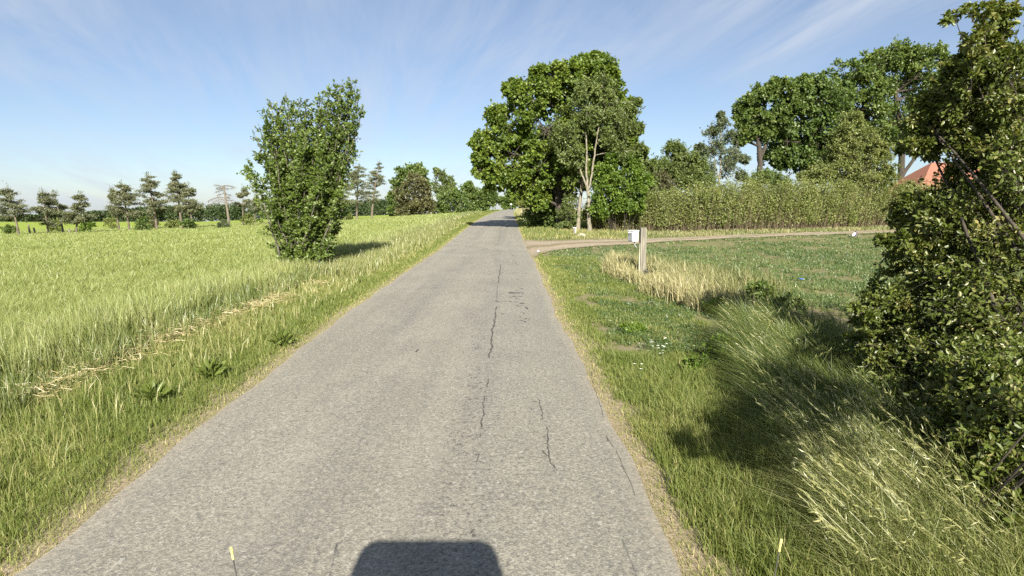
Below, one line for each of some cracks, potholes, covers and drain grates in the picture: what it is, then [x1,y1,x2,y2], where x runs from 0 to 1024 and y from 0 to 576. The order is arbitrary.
crack [476,255,530,463]
crack [517,399,557,470]
